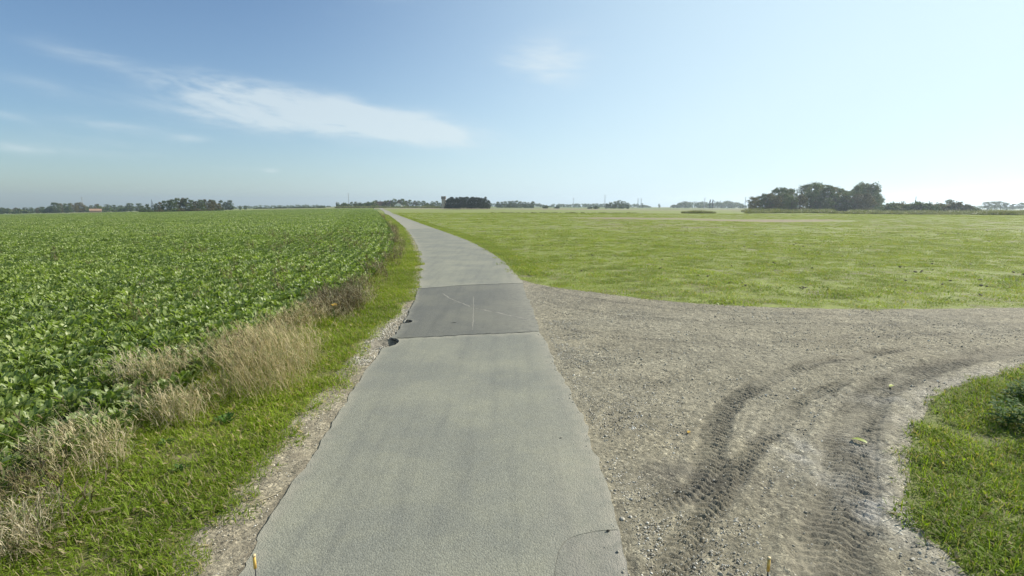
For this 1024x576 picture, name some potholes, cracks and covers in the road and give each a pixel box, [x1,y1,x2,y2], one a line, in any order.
crack [443,293,531,327]
